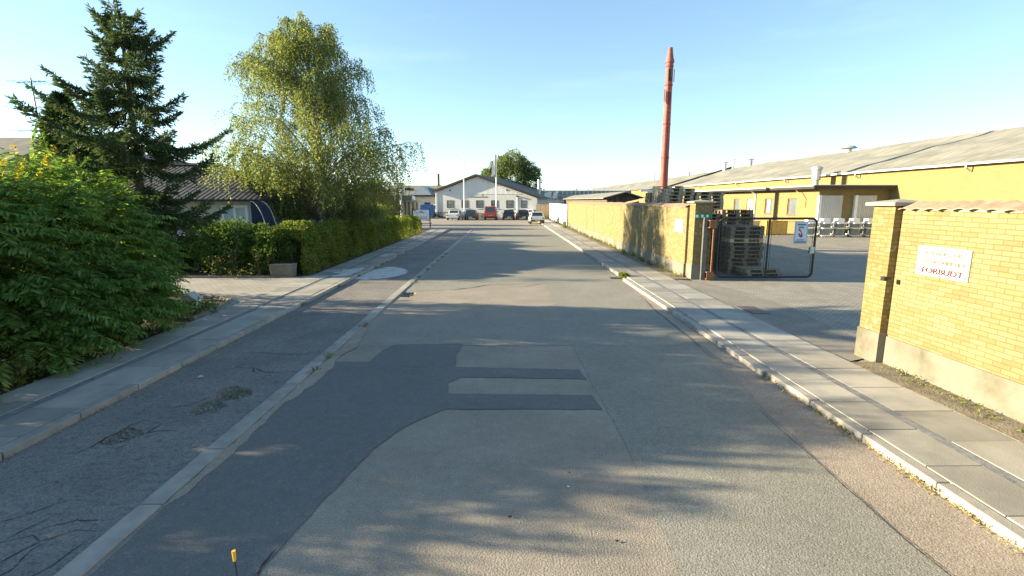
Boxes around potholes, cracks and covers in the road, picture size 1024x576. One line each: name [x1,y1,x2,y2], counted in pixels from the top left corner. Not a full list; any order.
crack [1,502,97,576]
pothole [99,423,153,445]
pothole [187,397,235,415]
pothole [212,385,258,406]
crack [77,420,170,453]
